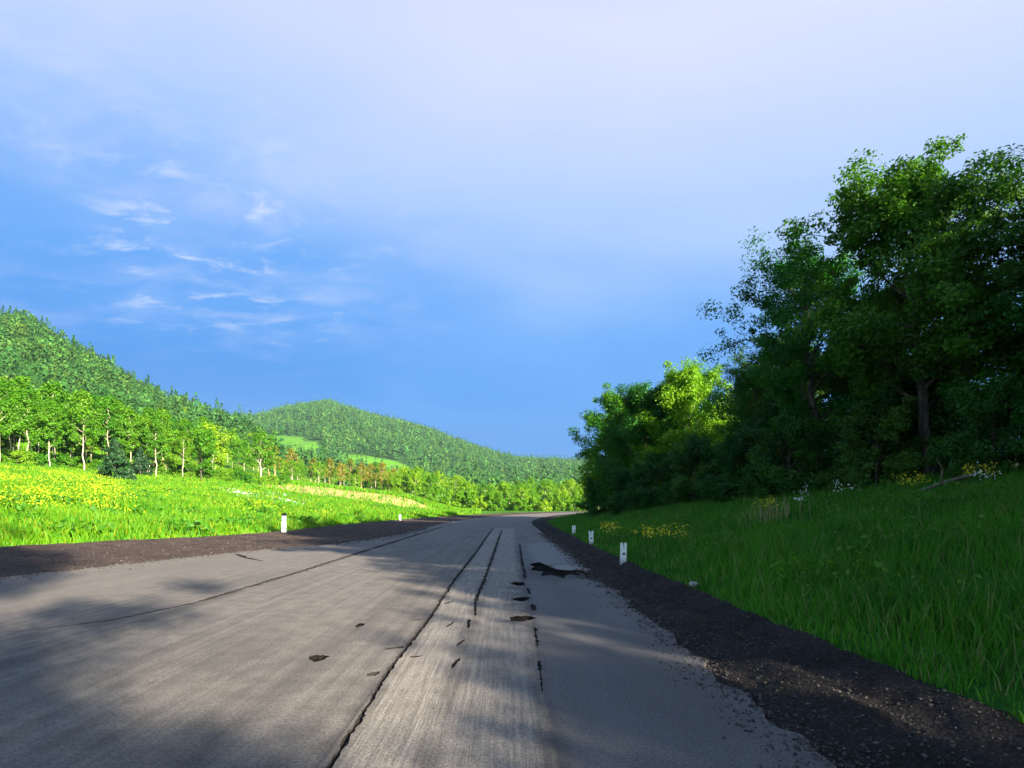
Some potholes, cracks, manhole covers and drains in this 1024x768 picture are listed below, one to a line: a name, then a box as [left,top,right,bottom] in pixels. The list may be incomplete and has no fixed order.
pothole [530,562,587,578]
crack [326,528,502,768]
